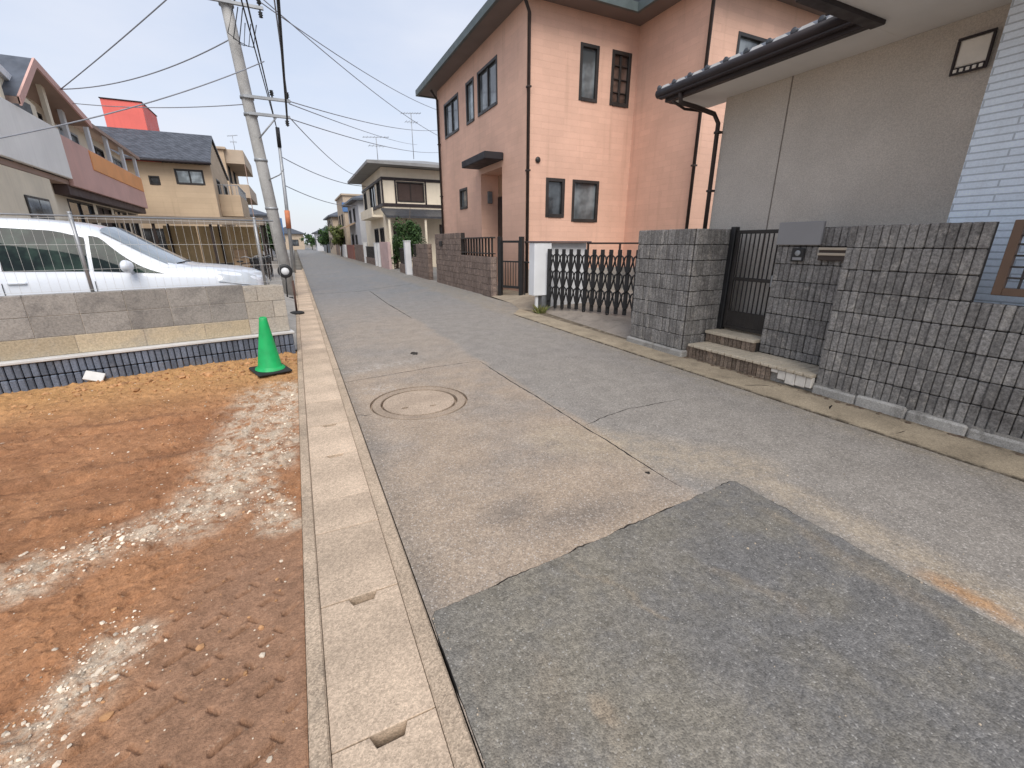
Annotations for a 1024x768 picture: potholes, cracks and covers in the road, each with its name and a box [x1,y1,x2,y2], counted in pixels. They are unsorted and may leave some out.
crack [350,362,681,487]
manhole cover [370,386,468,420]
